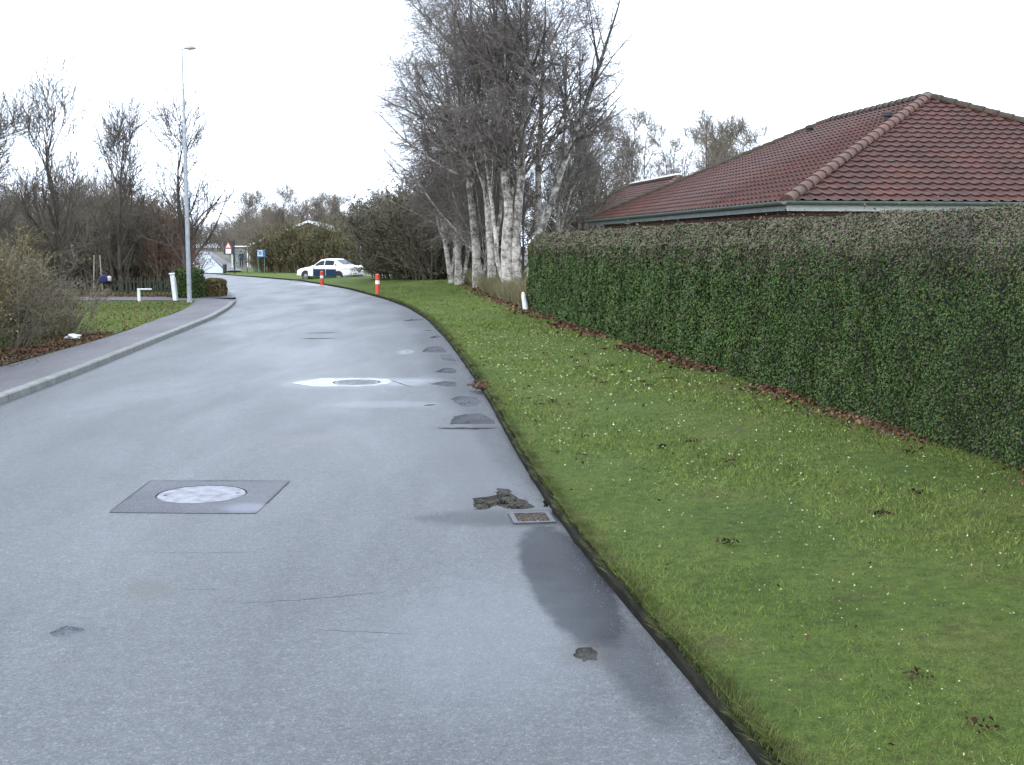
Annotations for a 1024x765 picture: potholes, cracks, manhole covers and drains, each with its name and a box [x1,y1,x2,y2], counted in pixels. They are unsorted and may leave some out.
drain grate [508,511,556,524]
pothole [472,488,535,510]
pothole [573,647,598,662]
manhole cover [154,485,248,504]
crack [246,592,382,603]
